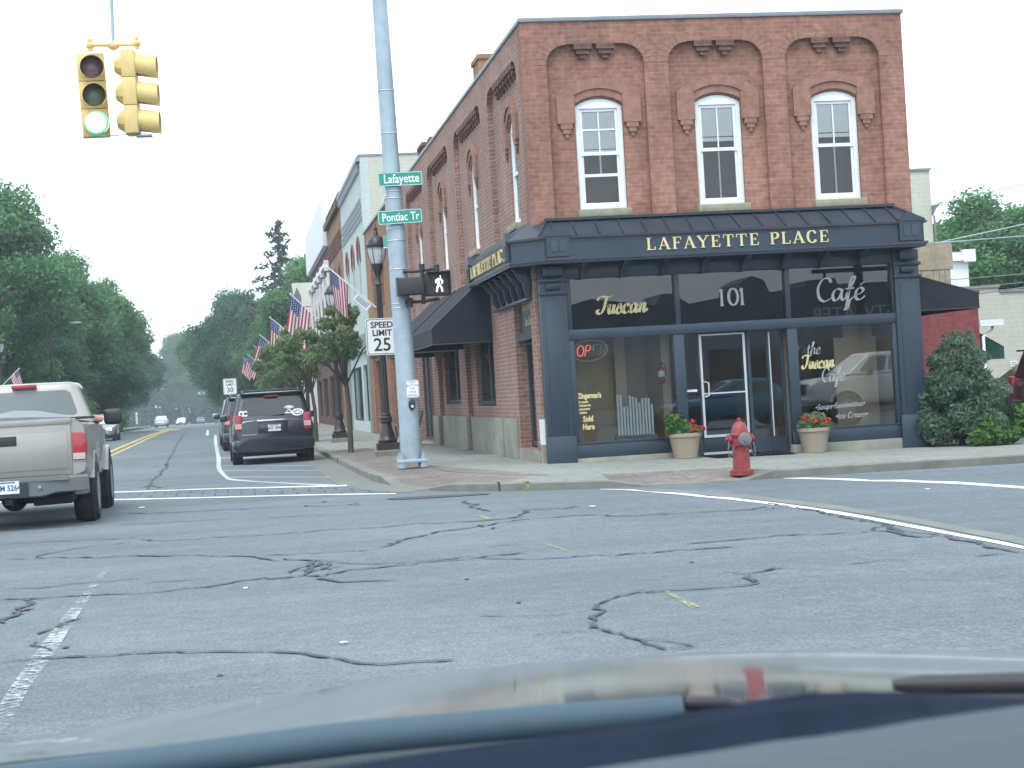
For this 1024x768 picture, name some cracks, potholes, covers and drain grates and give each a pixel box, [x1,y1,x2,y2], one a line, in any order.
crack [862,526,940,537]
crack [0,500,844,664]
crack [128,430,219,491]
